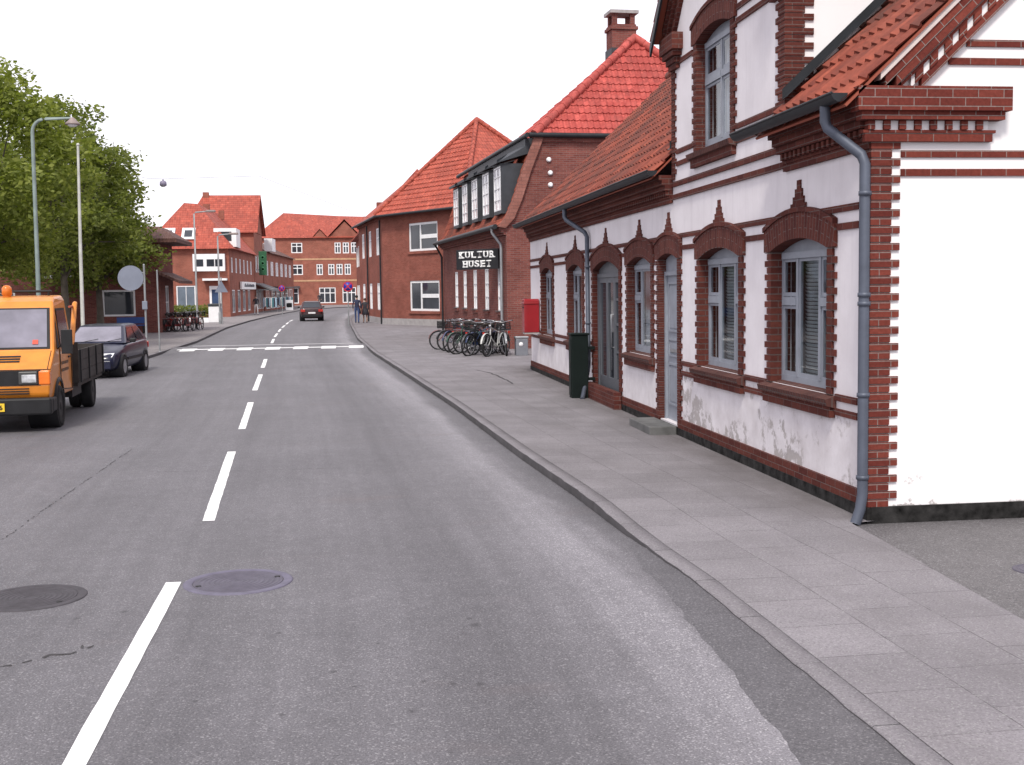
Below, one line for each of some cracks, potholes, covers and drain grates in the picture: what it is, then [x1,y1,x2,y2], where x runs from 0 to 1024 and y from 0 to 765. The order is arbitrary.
crack [4,645,94,666]
crack [3,451,129,539]
manhole cover [0,584,88,612]
manhole cover [183,569,293,596]
